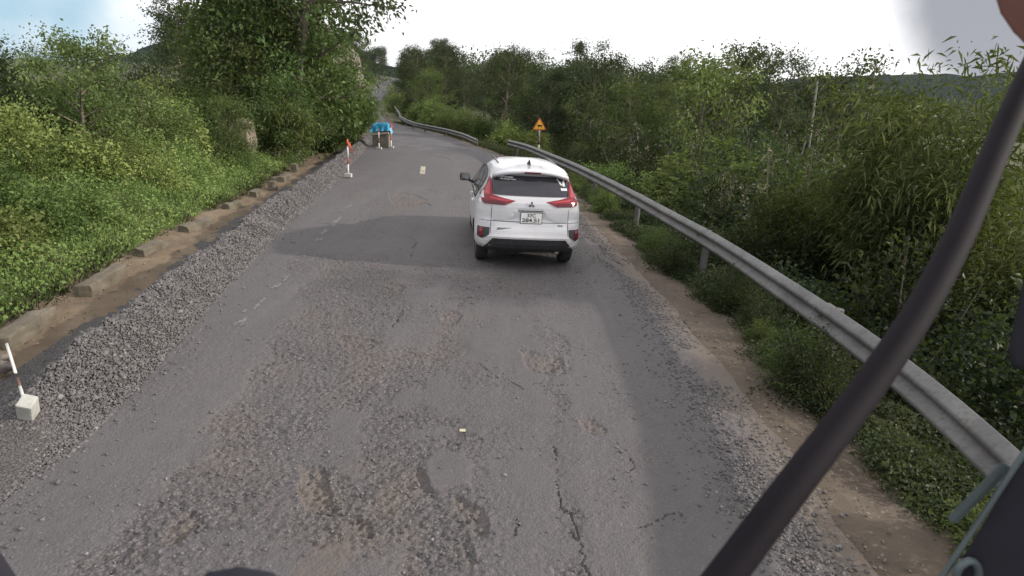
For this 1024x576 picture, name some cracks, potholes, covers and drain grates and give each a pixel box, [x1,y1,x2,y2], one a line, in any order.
pothole [450,492,491,541]
crack [390,308,405,328]
pothole [411,462,437,499]
pothole [438,310,464,326]
crack [551,446,592,576]
pothole [517,348,565,375]
crack [623,449,637,484]
pothole [577,417,610,436]
crack [636,511,687,529]
pothole [293,464,344,517]
